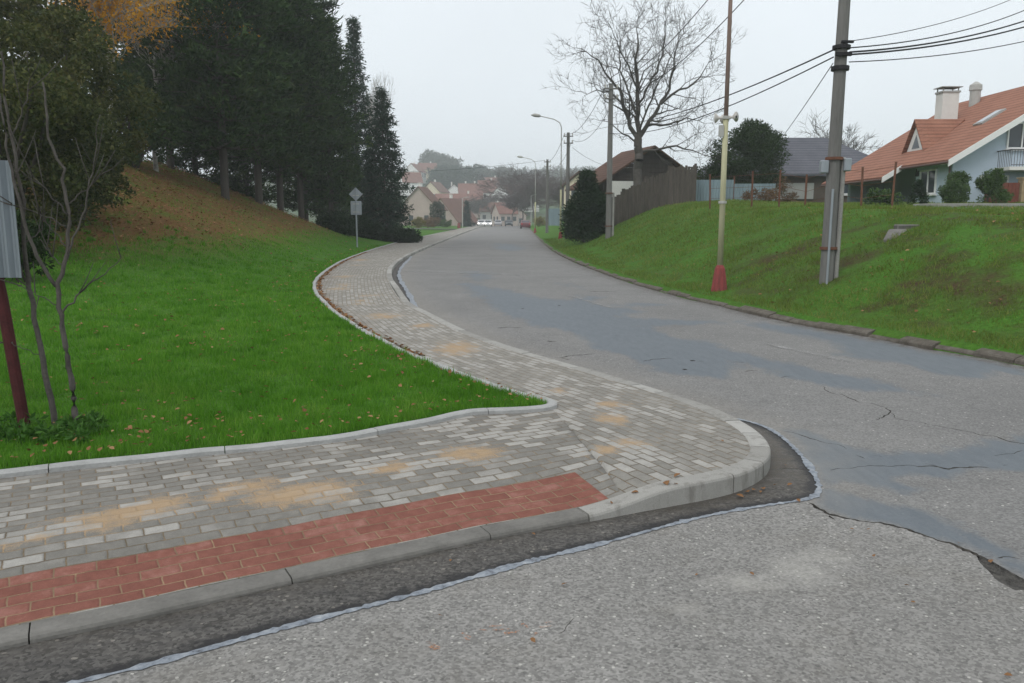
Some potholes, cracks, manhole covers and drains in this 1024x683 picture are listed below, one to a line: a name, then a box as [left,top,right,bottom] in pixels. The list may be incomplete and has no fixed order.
crack [784,387,1024,470]
crack [809,503,980,558]
